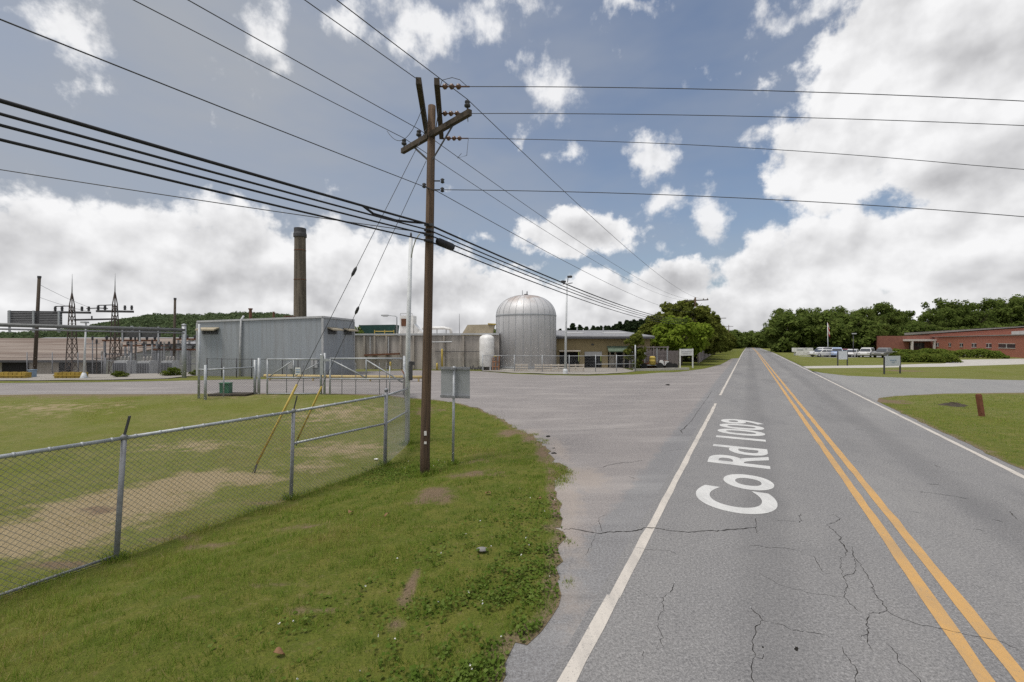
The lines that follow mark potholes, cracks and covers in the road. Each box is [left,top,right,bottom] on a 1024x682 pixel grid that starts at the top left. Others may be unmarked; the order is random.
crack [761,515,1020,682]
crack [564,514,795,554]
